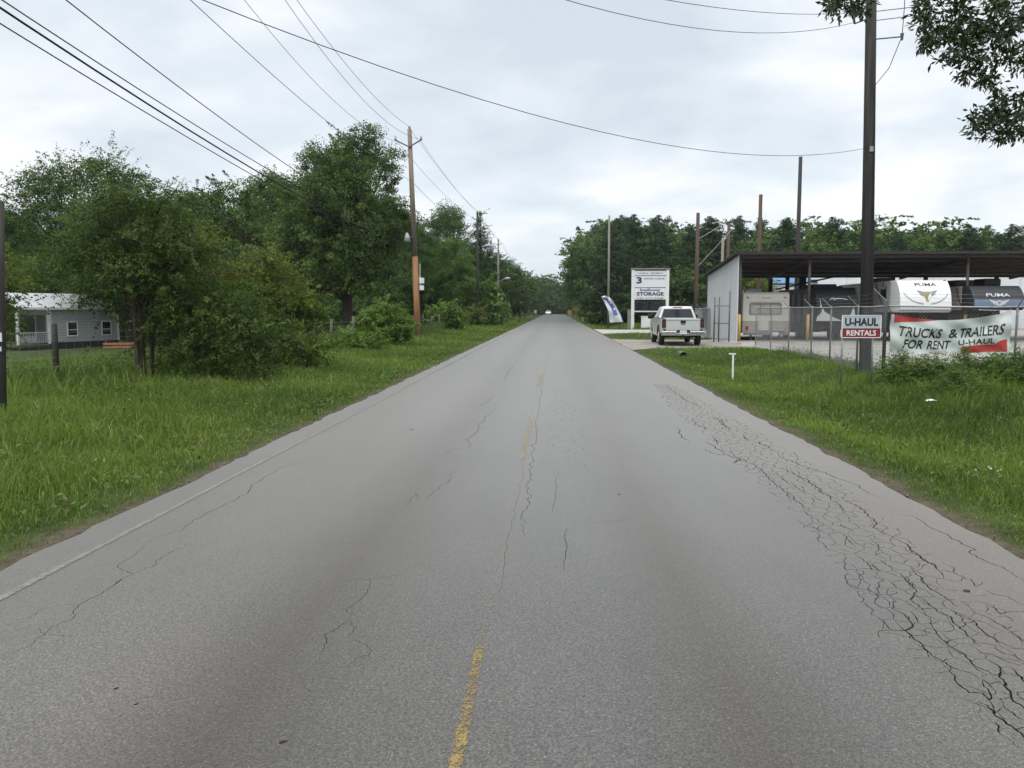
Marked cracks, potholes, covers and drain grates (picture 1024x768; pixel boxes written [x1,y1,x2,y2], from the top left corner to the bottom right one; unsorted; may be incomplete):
crack [323,576,390,663]
crack [520,355,592,531]
crack [654,384,1024,746]
crack [10,462,297,655]
